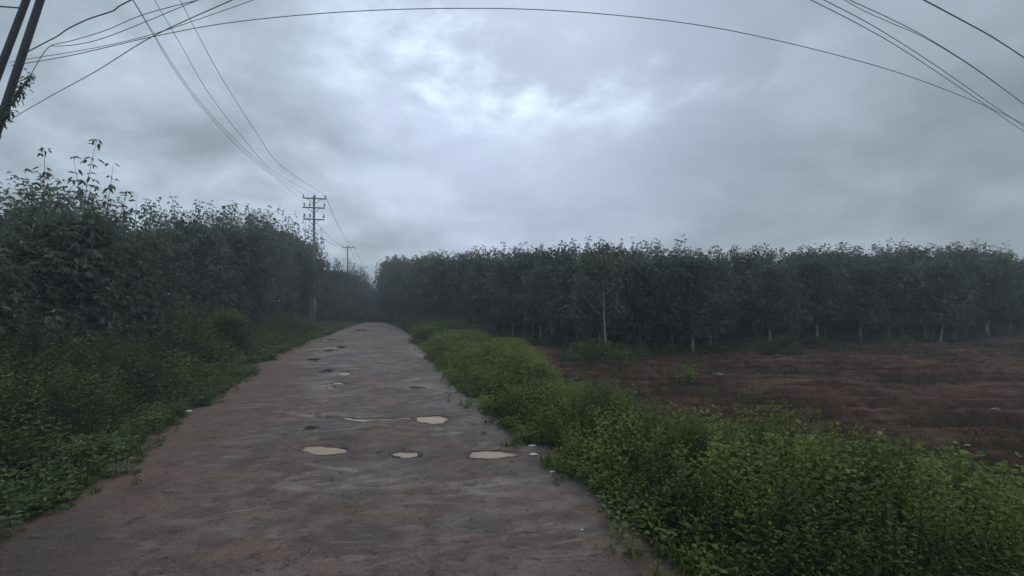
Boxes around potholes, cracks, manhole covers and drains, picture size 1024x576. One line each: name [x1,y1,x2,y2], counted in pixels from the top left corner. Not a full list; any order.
pothole [465,449,522,460]
pothole [389,451,421,459]
pothole [410,414,451,425]
pothole [297,444,351,456]
